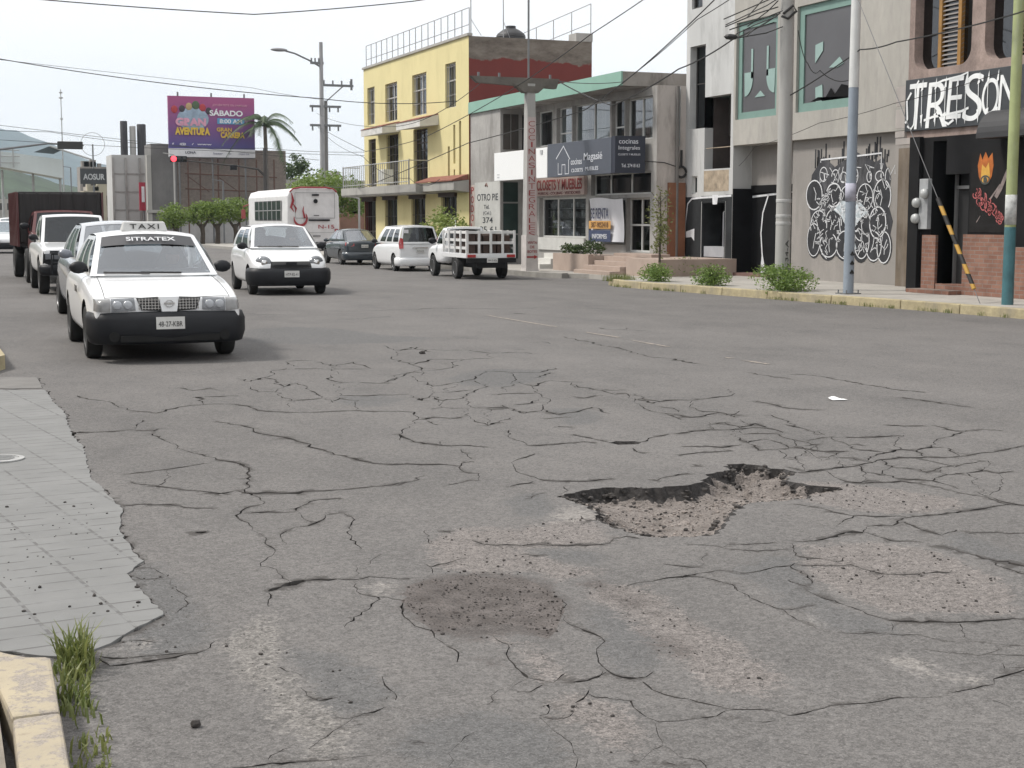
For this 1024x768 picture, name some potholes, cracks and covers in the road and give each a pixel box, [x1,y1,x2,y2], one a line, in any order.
crack [12,328,1024,768]
manhole cover [0,454,25,463]
pothole [557,463,843,537]
